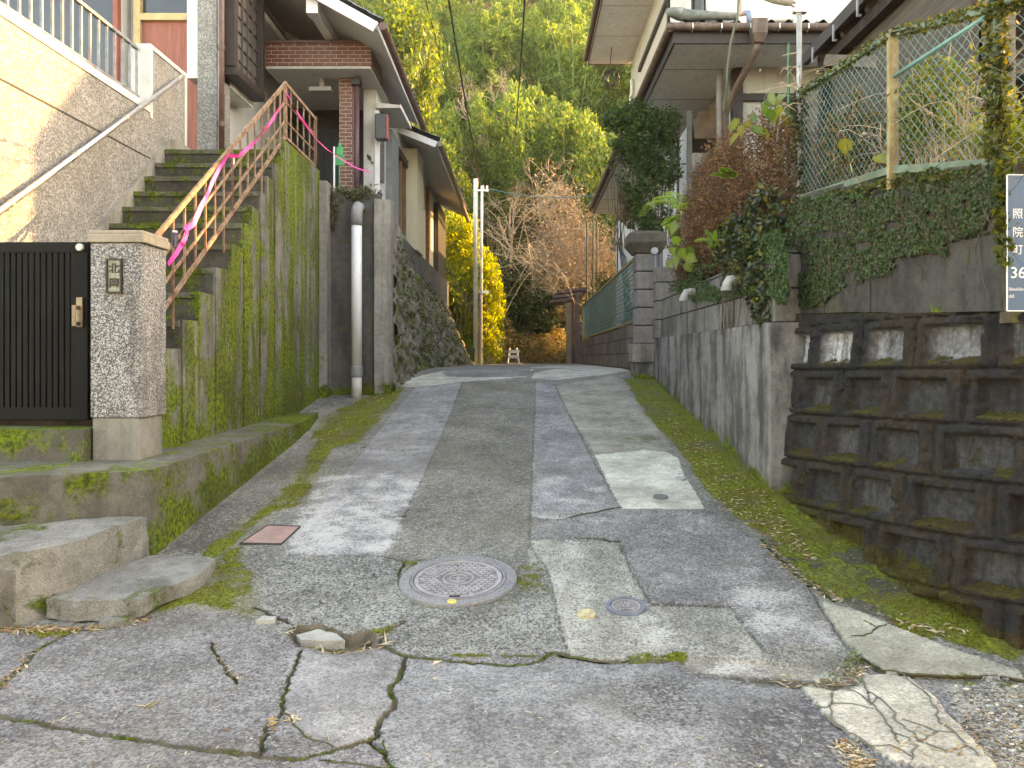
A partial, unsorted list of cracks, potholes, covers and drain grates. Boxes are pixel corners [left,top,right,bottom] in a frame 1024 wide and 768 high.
crack [0,634,406,768]
utility cover [239,524,301,545]
manhole cover [399,555,517,608]
pothole [287,624,385,654]
utility cover [606,596,646,617]
crack [851,620,887,636]
crack [814,658,1024,760]
